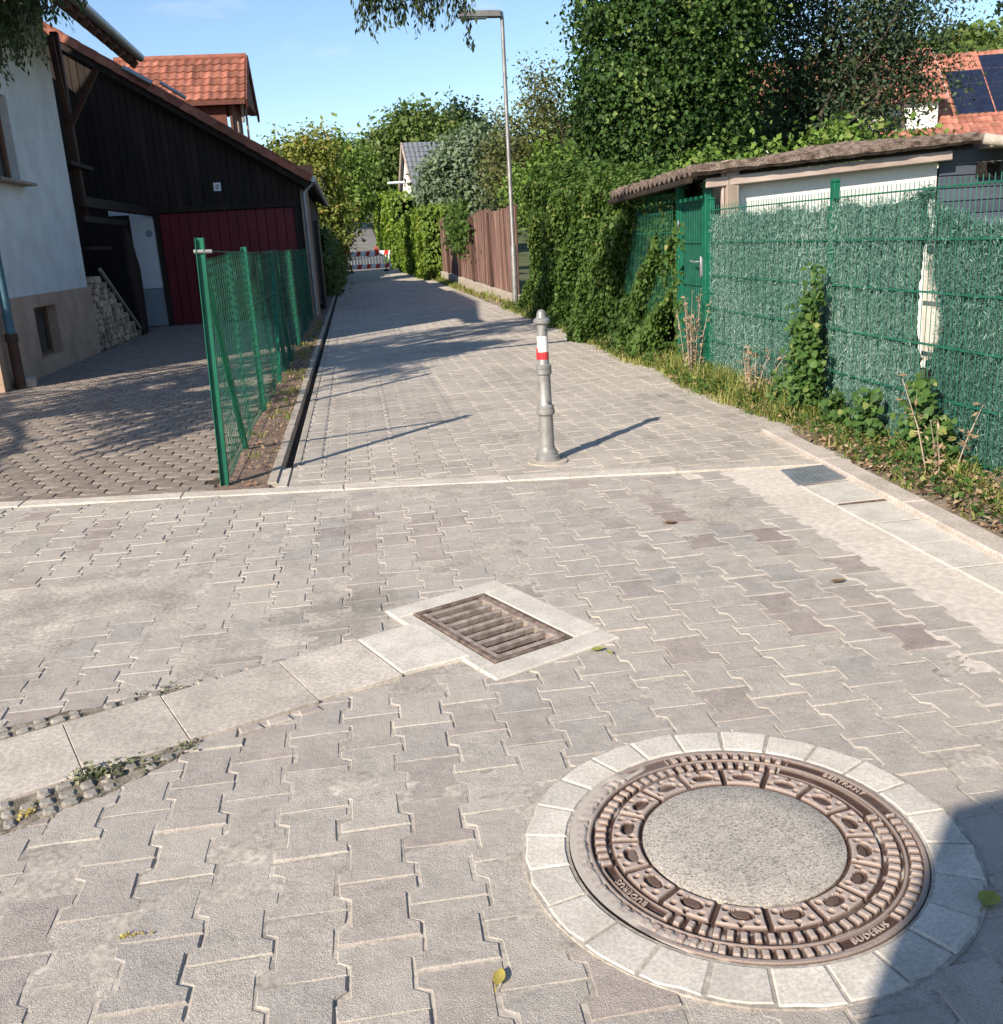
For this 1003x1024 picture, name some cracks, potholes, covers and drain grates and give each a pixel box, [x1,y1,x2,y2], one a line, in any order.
manhole cover [523,732,988,1011]
drain grate [385,580,621,681]
